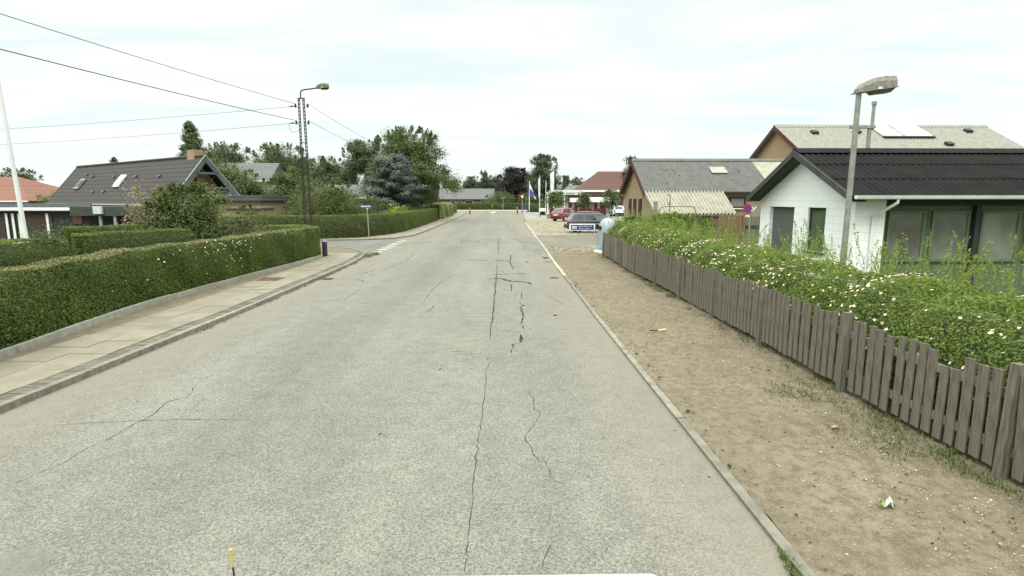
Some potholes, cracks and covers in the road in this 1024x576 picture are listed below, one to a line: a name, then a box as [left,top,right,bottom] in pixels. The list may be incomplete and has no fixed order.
crack [524,391,565,485]
crack [15,357,234,484]
crack [453,254,564,369]
